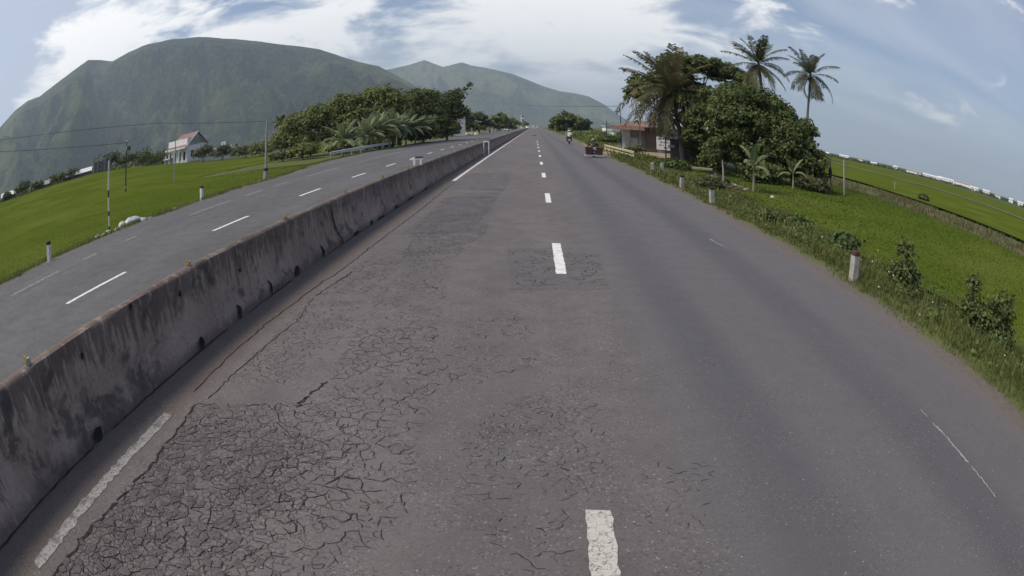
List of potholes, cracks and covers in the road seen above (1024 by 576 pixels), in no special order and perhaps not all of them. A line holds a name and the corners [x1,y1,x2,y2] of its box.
crack [458,396,612,500]
crack [0,181,495,576]
crack [509,250,608,287]
crack [633,461,714,527]
crack [486,508,574,576]
